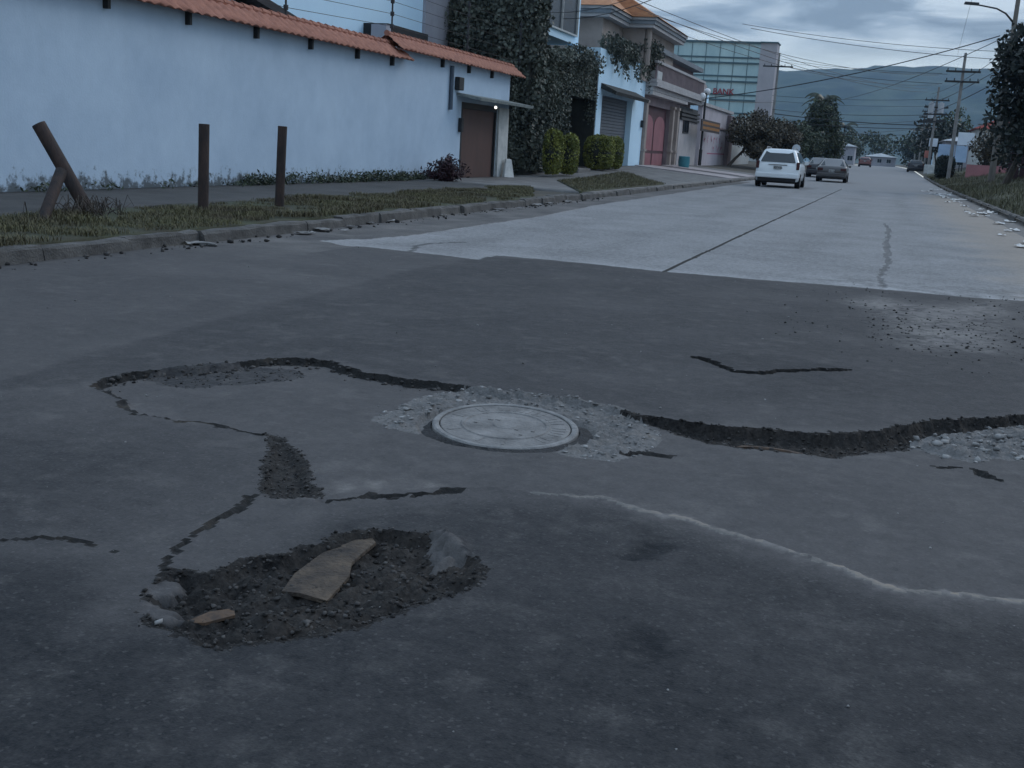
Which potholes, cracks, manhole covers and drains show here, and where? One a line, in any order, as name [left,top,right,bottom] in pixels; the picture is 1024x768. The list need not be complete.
manhole cover [370,386,662,462]
crack [619,451,677,459]
crack [90,357,471,436]
crack [930,465,1004,482]
crack [0,535,119,553]
pothole [133,527,494,652]
pothole [257,432,326,499]
crack [325,487,467,504]
crack [690,356,852,375]
crack [876,223,893,289]
crack [155,494,260,577]
